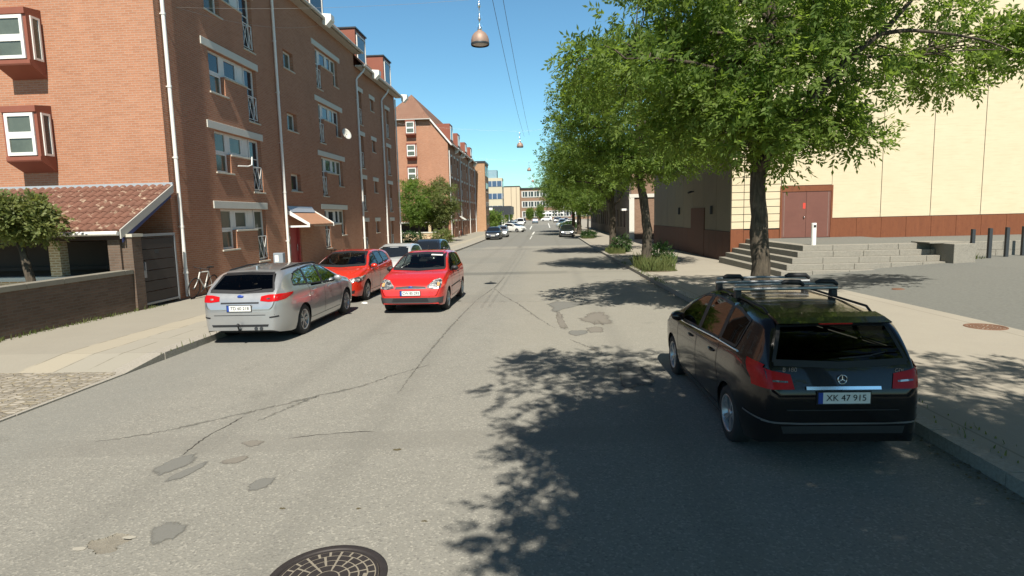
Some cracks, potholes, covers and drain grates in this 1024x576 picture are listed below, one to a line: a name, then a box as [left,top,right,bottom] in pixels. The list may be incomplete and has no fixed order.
manhole cover [270,545,388,576]
